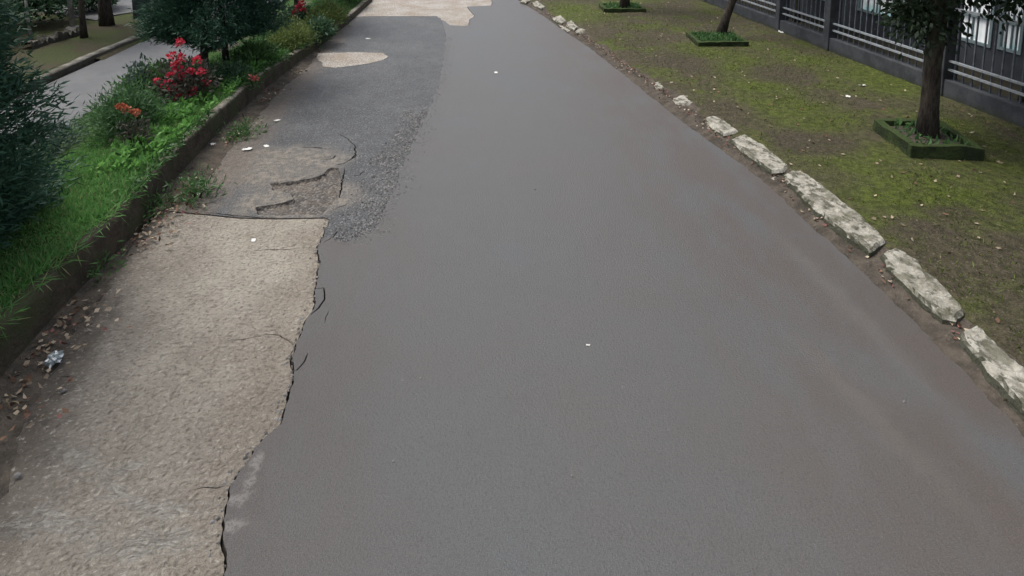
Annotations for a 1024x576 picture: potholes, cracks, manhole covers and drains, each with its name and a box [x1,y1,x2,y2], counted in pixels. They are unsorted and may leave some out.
pothole [255,167,341,216]
crack [214,231,338,576]
